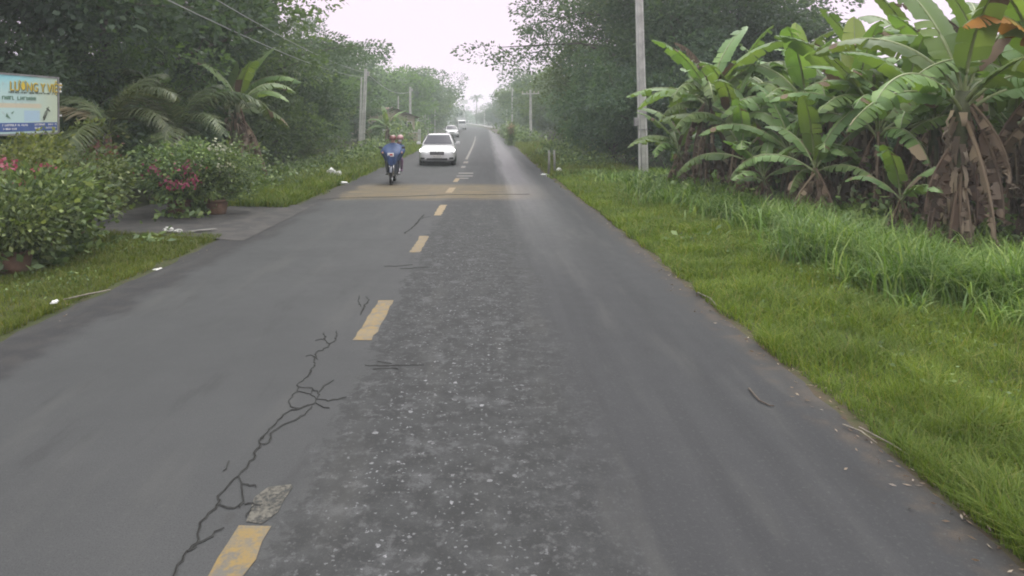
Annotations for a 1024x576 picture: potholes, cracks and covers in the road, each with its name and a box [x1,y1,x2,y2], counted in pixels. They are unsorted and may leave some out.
crack [172,296,370,576]
crack [365,361,424,369]
